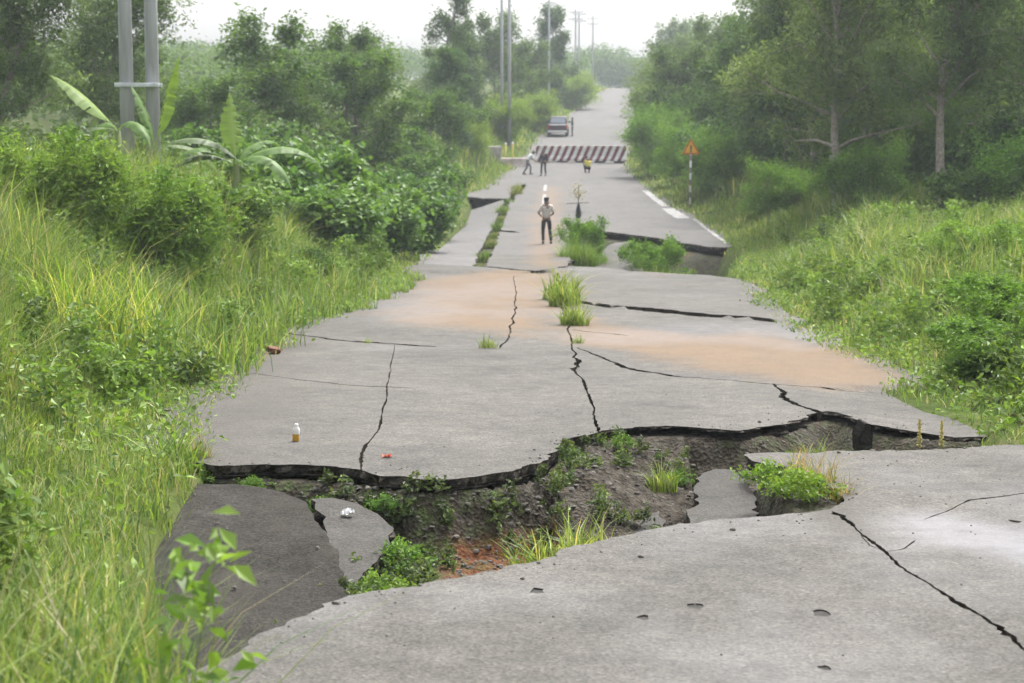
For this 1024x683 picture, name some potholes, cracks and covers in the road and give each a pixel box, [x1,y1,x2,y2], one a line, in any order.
pothole [204,420,982,586]
crack [252,345,405,479]
crack [552,273,866,441]
crack [831,493,1024,651]
crack [476,188,525,266]
crack [499,277,518,349]
